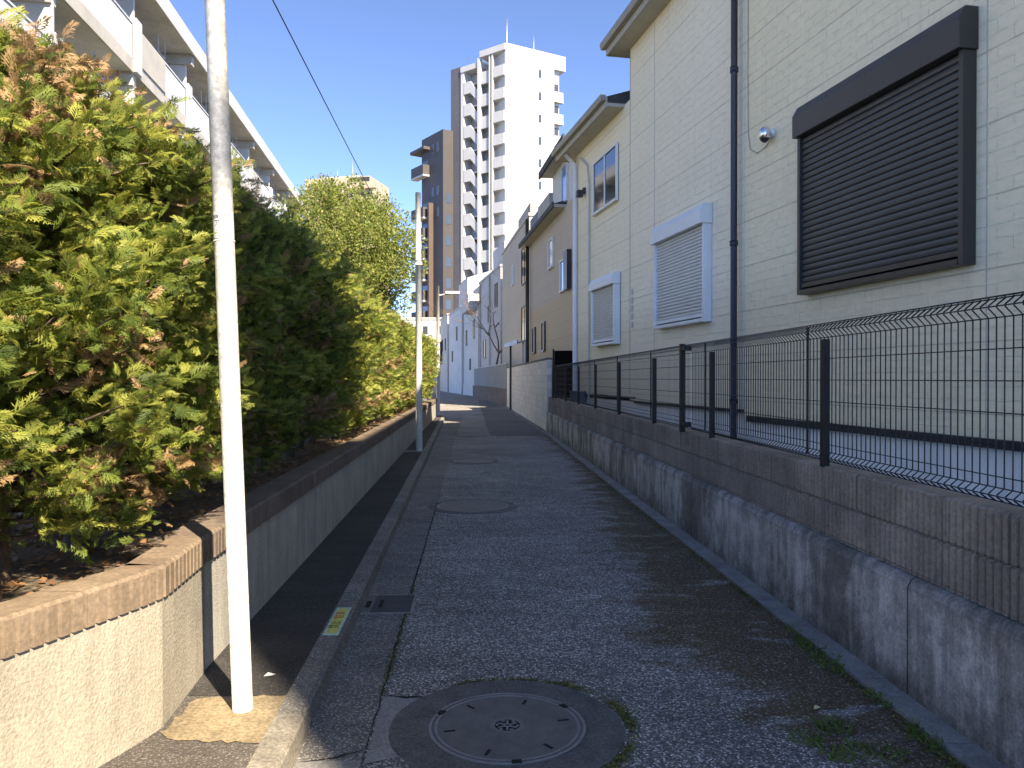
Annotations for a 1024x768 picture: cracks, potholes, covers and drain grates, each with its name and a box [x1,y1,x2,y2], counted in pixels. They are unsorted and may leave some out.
manhole cover [389,680,625,768]
manhole cover [428,499,517,514]
